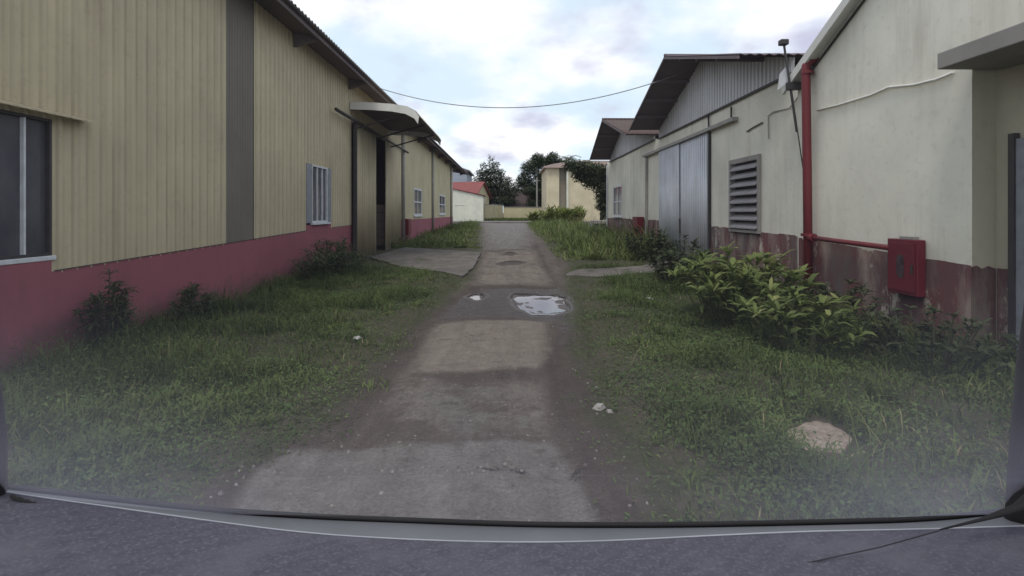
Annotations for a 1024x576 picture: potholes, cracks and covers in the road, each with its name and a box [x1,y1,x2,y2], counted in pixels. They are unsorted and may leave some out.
pothole [507,293,574,317]
pothole [463,292,490,301]
